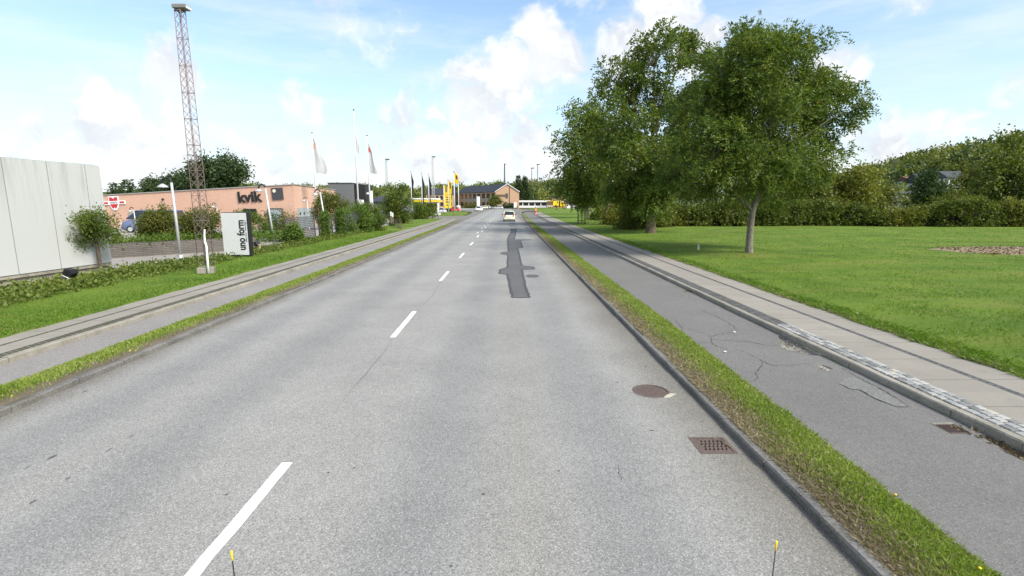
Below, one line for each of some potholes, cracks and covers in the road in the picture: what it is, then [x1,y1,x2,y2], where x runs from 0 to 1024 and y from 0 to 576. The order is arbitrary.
pothole [778,336,820,356]
drain grate [688,437,739,454]
drain grate [931,423,973,434]
manhole cover [632,384,675,398]
crack [675,310,810,382]
